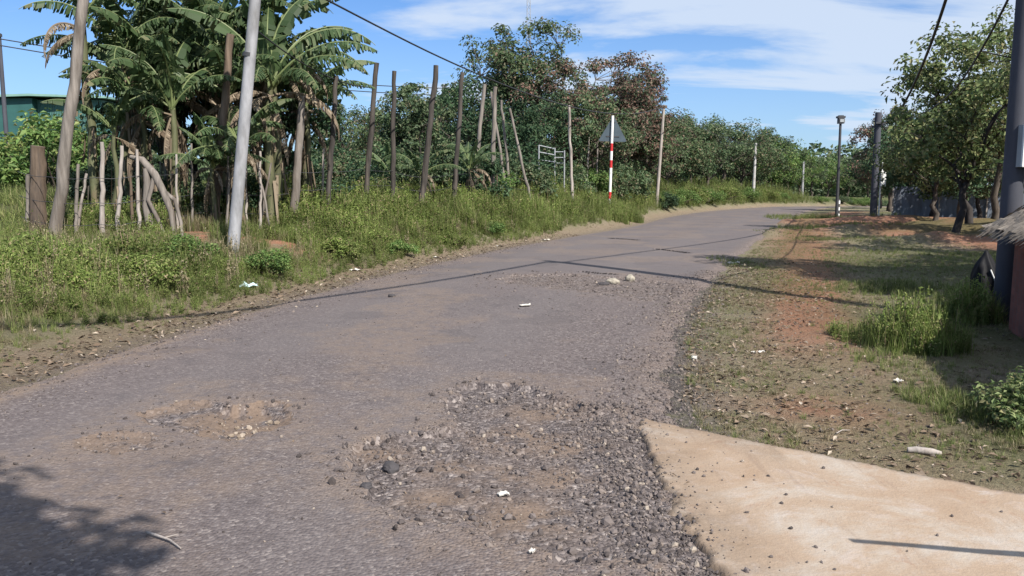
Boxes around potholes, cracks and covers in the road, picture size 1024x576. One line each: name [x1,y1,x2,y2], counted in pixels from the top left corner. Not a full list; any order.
pothole [345,382,717,576]
pothole [70,430,160,456]
pothole [135,399,294,442]
